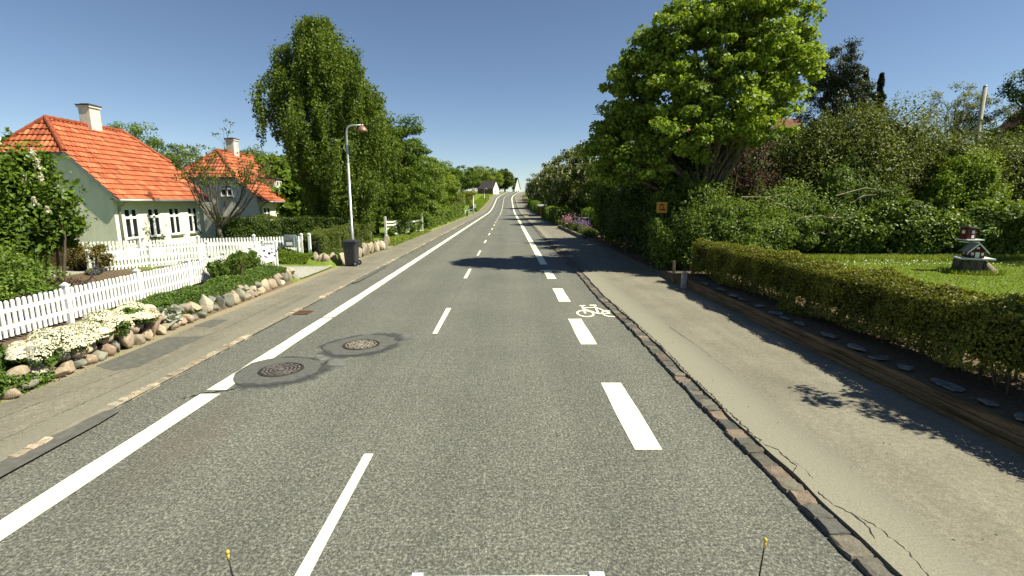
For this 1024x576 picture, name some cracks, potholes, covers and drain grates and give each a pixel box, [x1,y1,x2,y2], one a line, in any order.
manhole cover [342,339,380,350]
manhole cover [258,362,304,377]
